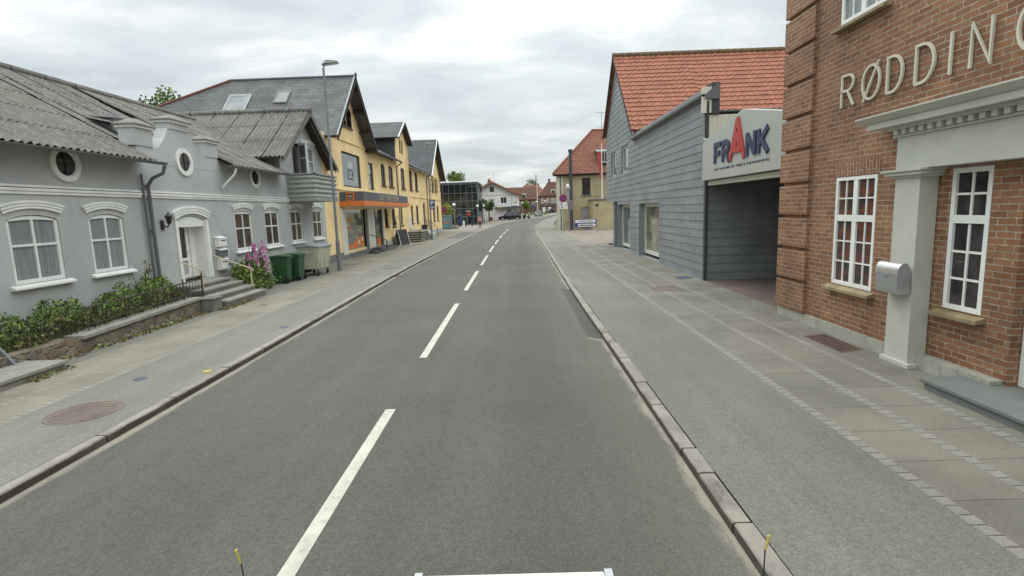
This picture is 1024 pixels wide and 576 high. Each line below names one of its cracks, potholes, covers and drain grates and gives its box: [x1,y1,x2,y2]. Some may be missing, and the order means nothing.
drain grate [804,333,864,353]
manhole cover [41,400,125,425]
